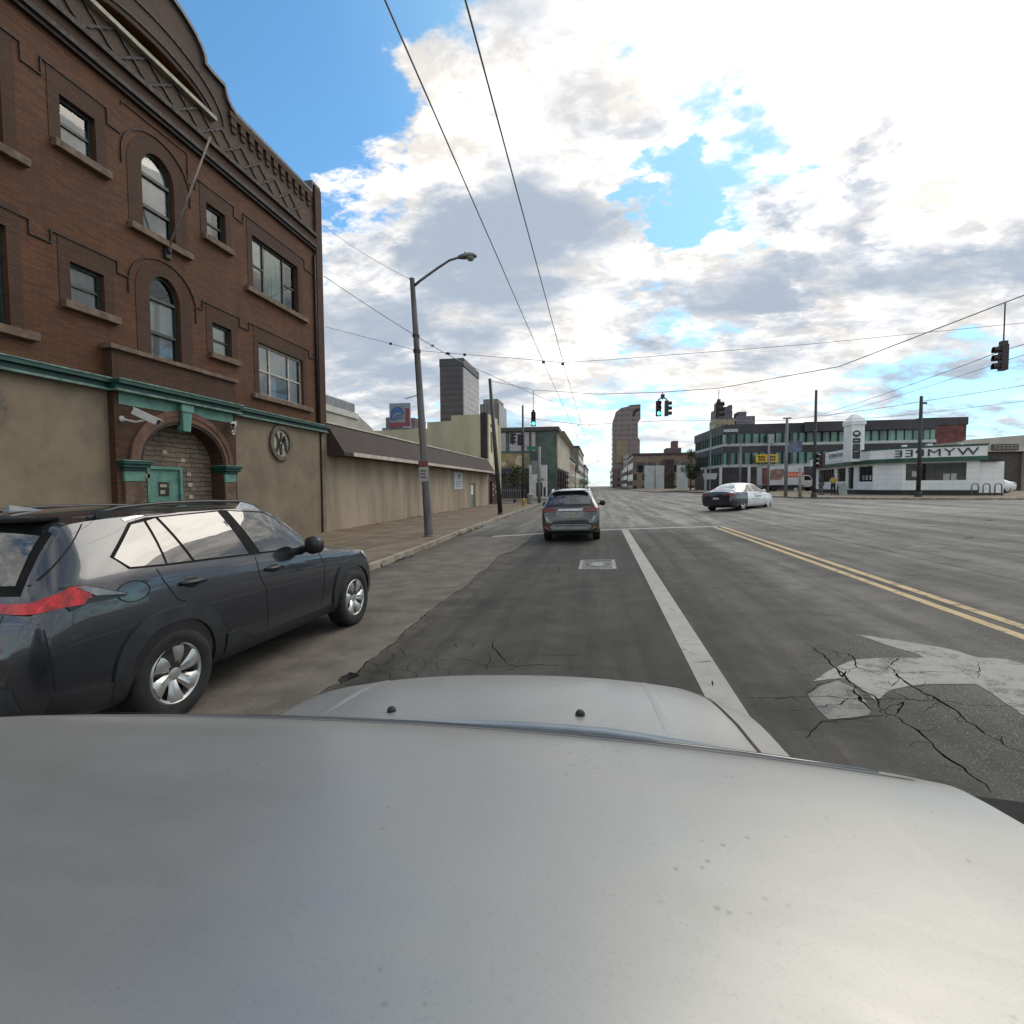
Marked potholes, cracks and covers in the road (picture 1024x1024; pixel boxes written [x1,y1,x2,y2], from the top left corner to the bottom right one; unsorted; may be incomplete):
crack [756,642,1024,793]
crack [323,535,583,691]
manhole cover [578,560,617,569]
